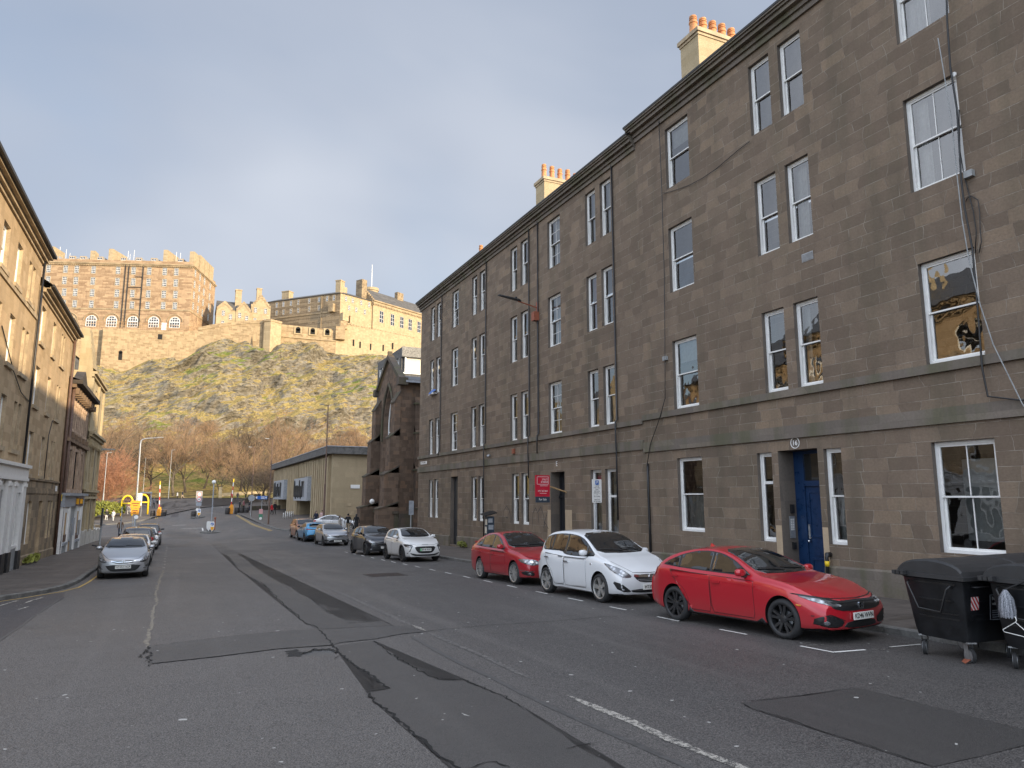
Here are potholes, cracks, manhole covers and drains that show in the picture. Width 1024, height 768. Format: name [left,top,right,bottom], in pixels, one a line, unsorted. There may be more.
crack [138,550,608,768]
